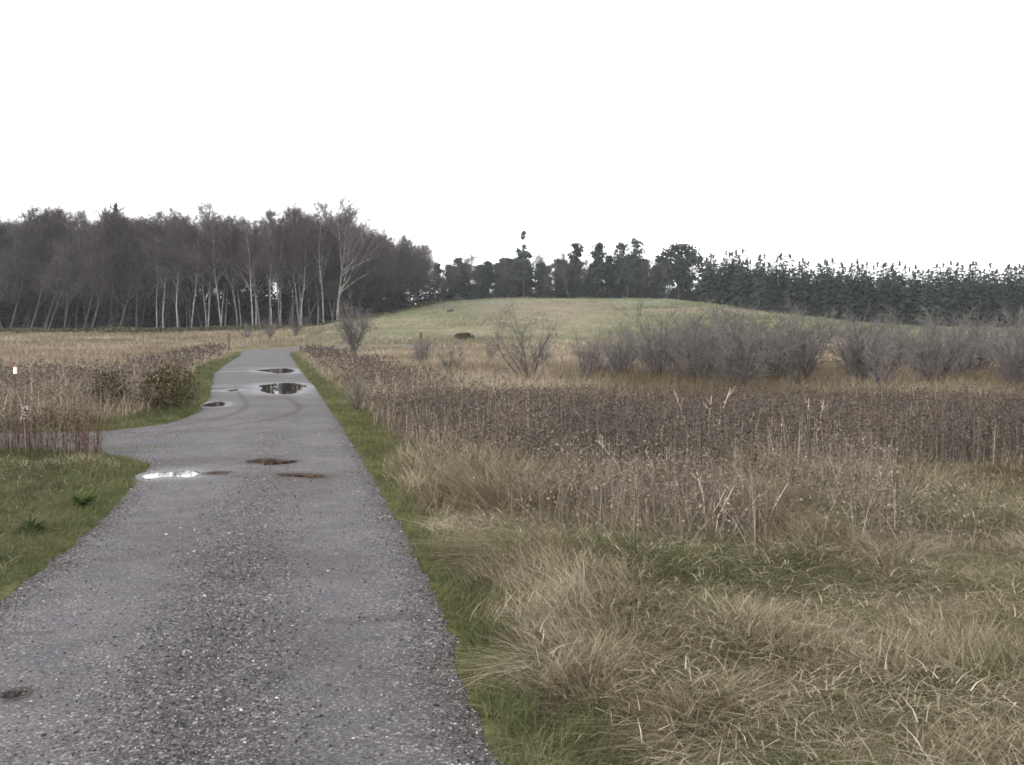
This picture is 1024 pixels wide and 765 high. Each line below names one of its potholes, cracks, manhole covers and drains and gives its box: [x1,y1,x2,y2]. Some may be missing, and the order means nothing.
pothole [253,383,312,395]
pothole [0,687,34,701]
pothole [138,470,204,480]
pothole [240,458,304,466]
